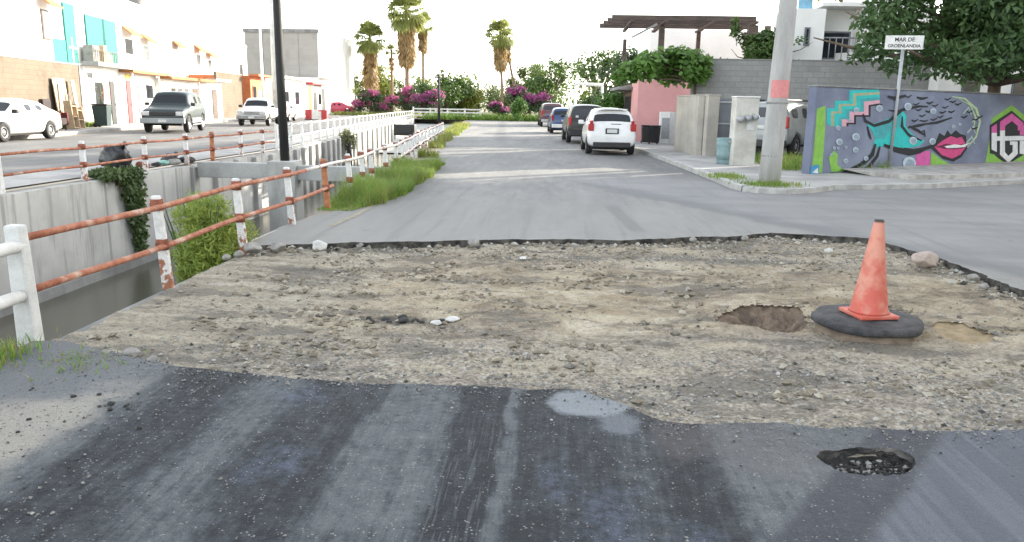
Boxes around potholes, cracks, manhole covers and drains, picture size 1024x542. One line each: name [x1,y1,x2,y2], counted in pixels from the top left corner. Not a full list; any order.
pothole [715,304,810,333]
pothole [818,449,913,476]
pothole [930,321,995,344]
